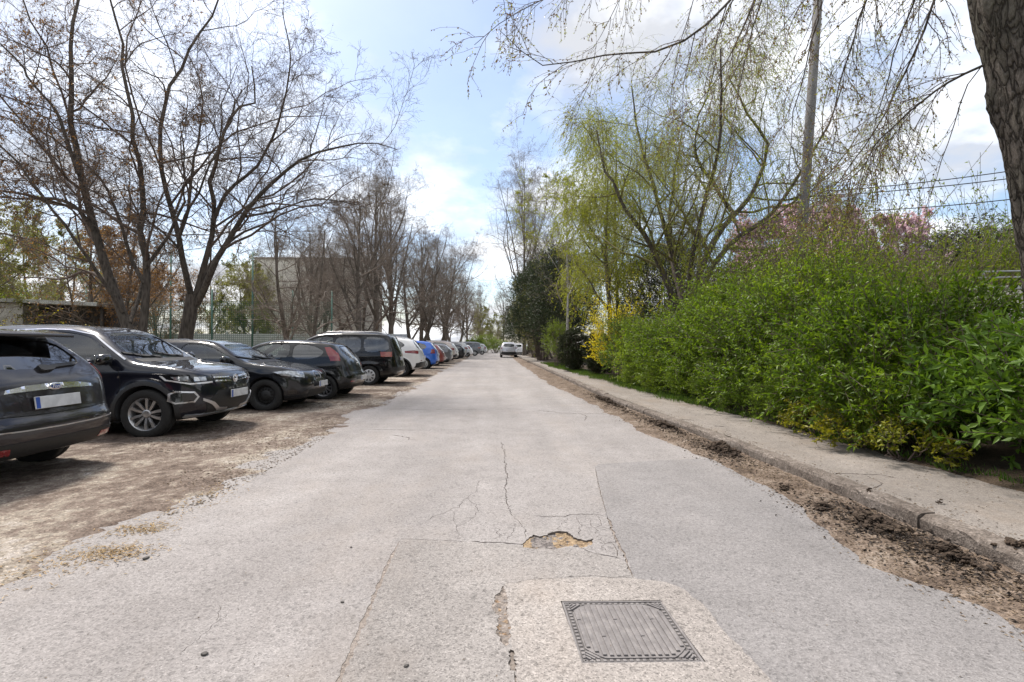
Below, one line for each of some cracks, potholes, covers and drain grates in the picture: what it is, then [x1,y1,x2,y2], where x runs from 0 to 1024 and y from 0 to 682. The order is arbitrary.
pothole [523,531,593,550]
crack [495,443,622,560]
manhole cover [562,601,704,663]
pothole [492,586,512,646]
